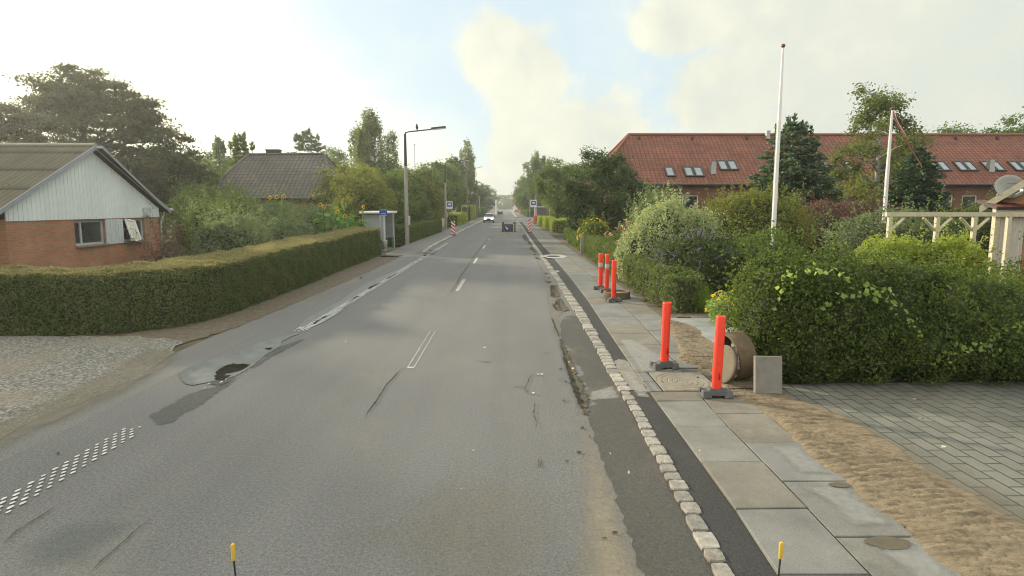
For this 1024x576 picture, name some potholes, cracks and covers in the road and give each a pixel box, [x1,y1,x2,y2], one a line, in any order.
crack [366,369,402,416]
pothole [553,298,569,312]
pothole [214,363,249,380]
crack [90,520,148,572]
manhole cover [647,372,712,392]
